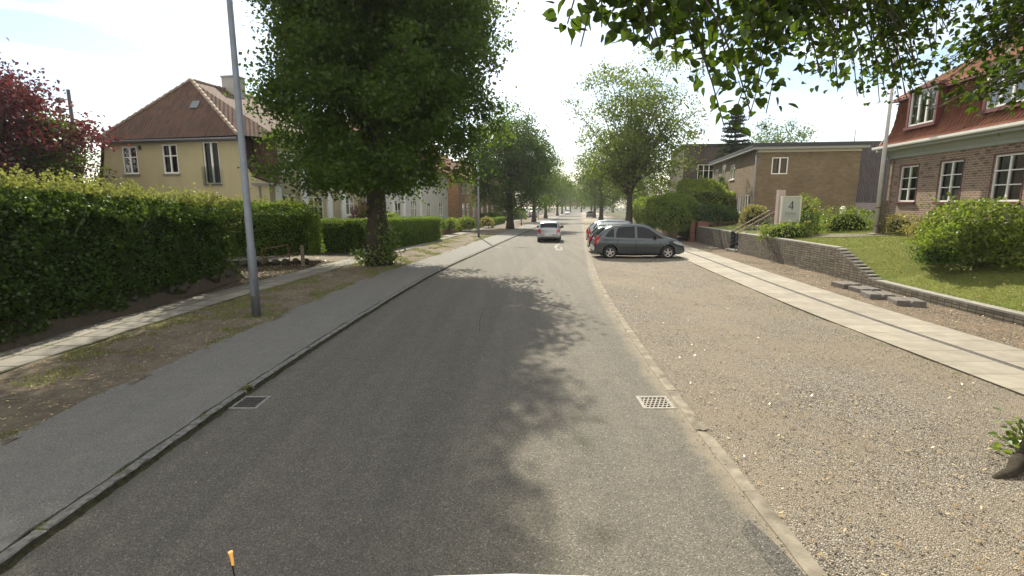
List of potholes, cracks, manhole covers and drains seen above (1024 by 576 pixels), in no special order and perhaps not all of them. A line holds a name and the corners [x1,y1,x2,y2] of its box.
drain grate [636,396,676,409]
drain grate [228,396,271,409]
